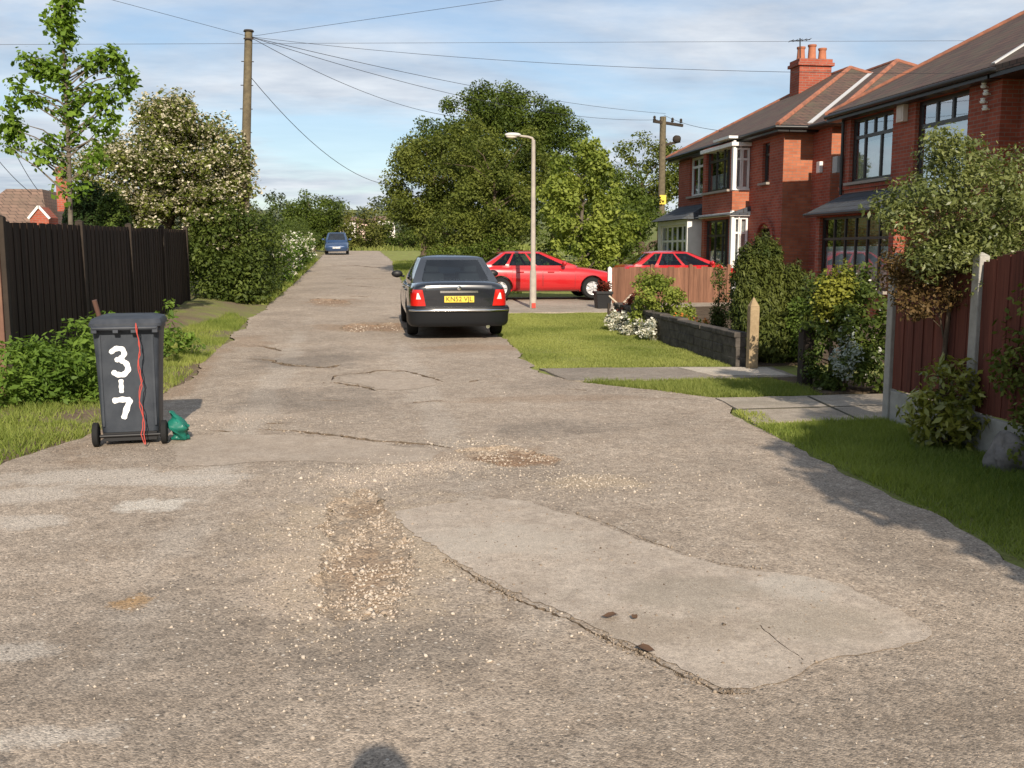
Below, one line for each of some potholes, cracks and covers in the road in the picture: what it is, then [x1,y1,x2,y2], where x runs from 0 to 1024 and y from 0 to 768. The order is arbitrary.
crack [443,558,750,695]
pothole [307,489,420,629]
crack [256,423,452,449]
pothole [453,445,564,469]
pothole [340,322,407,333]
pothole [310,298,352,306]
crack [254,346,443,401]
